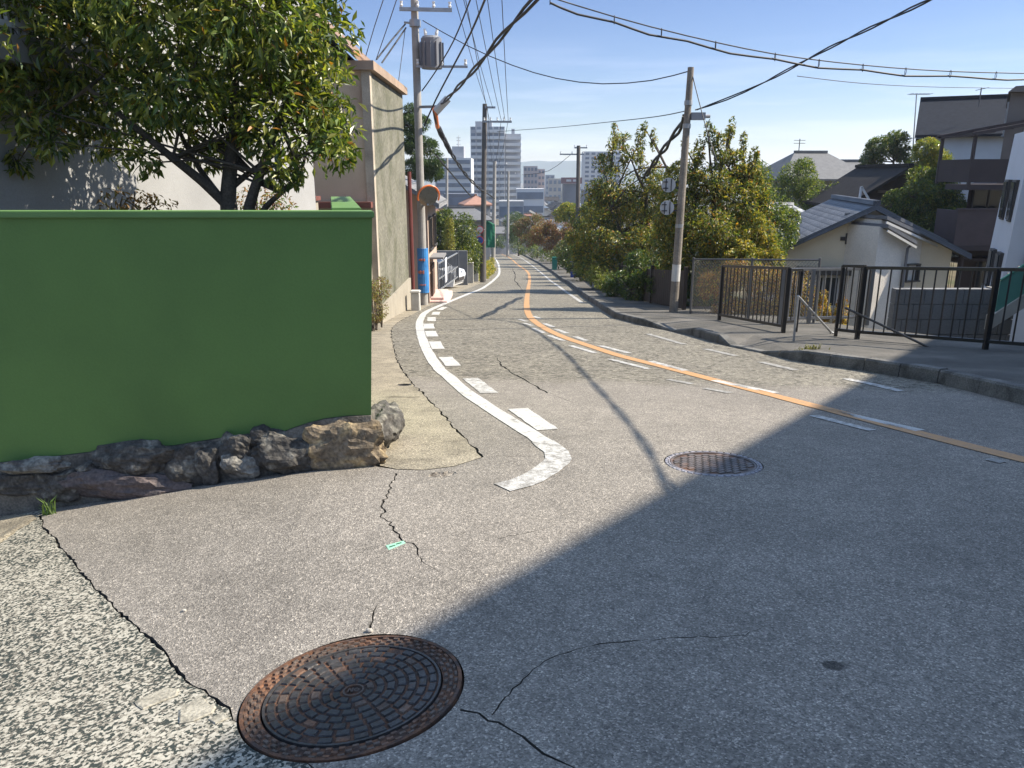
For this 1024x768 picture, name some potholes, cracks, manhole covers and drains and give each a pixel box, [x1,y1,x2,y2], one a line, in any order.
manhole cover [238,635,464,768]
manhole cover [665,451,763,477]
crack [461,623,771,768]
crack [495,356,575,403]
crack [390,317,483,458]
crack [379,474,438,571]
